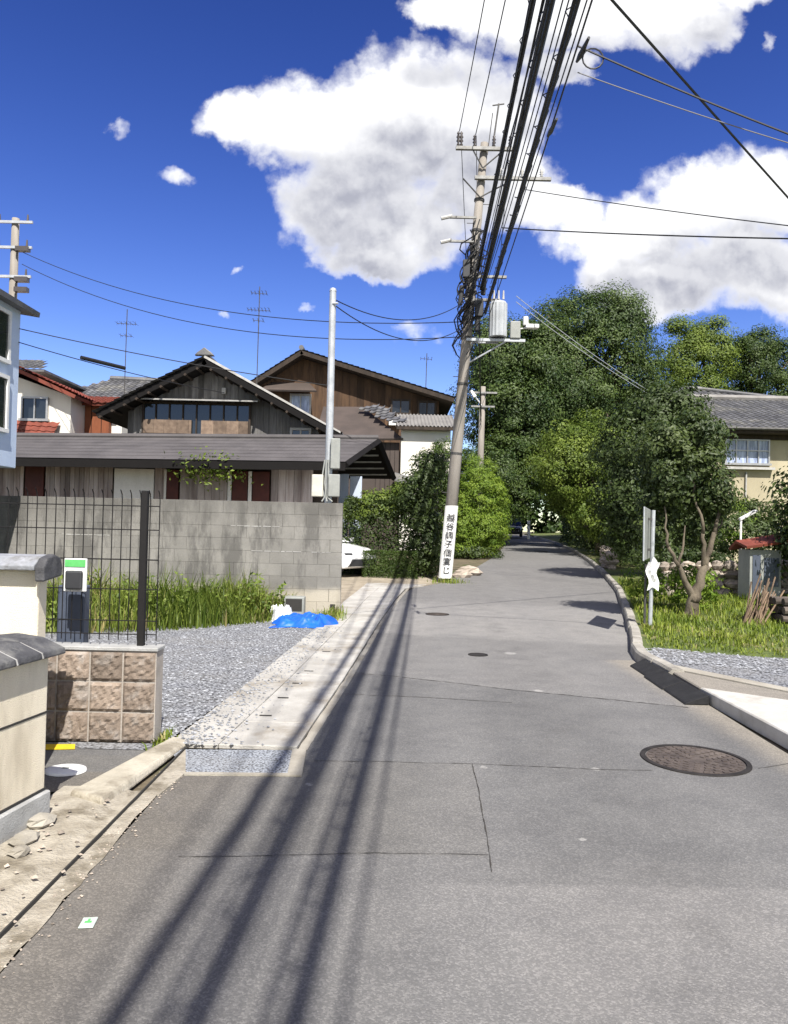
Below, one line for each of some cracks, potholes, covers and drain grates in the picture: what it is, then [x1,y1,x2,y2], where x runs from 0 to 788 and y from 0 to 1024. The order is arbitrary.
manhole cover [640,744,753,777]
